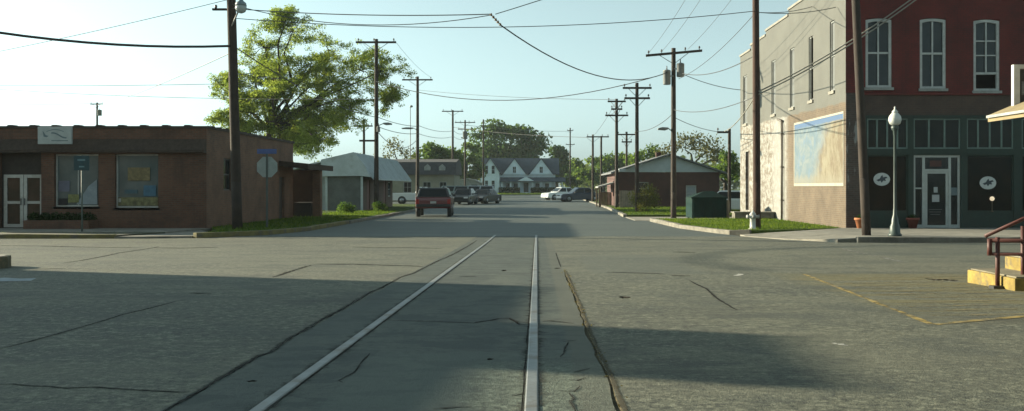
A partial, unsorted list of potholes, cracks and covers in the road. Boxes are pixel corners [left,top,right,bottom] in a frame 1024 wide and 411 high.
crack [338,353,370,382]
crack [0,384,189,393]
crack [273,247,438,277]
crack [1,302,172,349]
crack [560,340,589,411]
crack [613,272,736,310]
